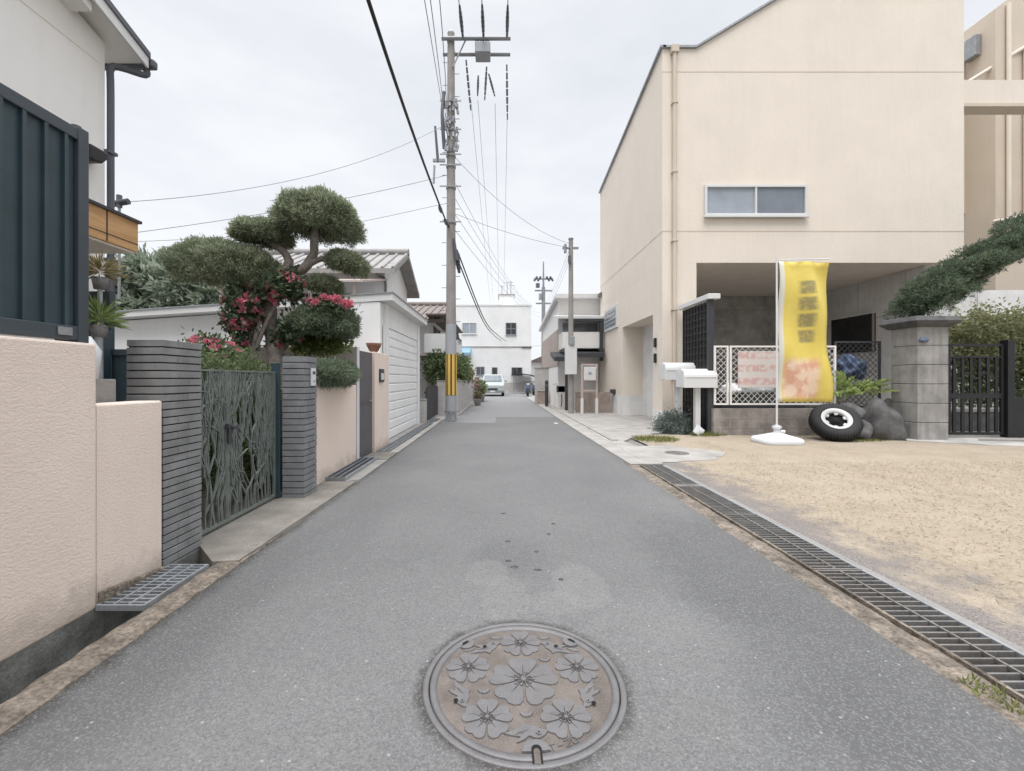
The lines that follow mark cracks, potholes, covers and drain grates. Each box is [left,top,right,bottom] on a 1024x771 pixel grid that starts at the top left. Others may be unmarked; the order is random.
drain grate [722,514,862,572]
drain grate [672,484,756,517]
drain grate [640,465,699,486]
drain grate [325,457,377,481]
drain grate [812,570,1024,704]
manhole cover [423,622,627,770]
drain grate [95,564,209,611]
